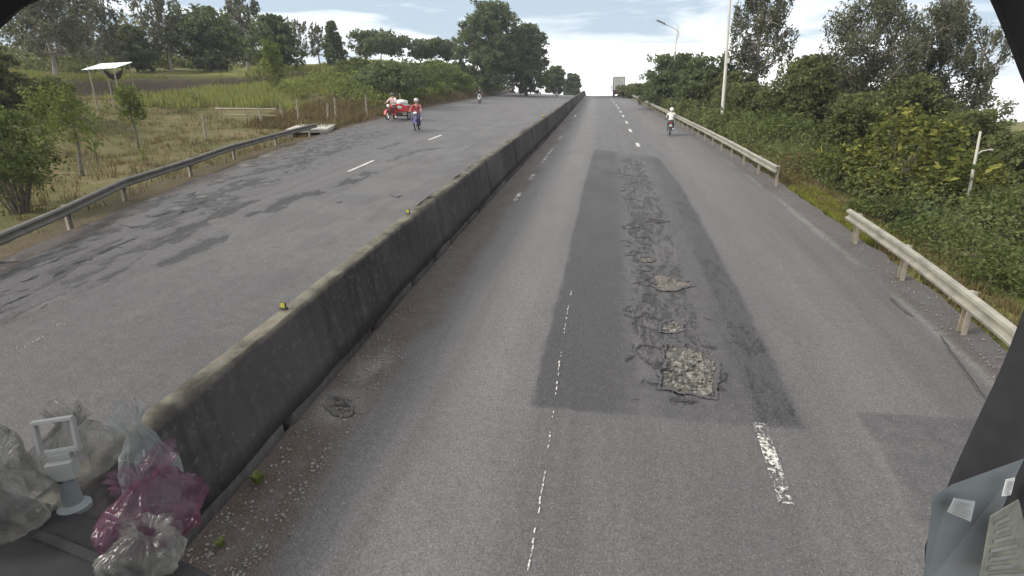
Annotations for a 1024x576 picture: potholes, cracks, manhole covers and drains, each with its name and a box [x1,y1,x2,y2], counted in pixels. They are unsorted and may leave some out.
pothole [658,318,686,334]
pothole [656,341,722,400]
pothole [650,272,696,292]
crack [623,222,727,404]
pothole [324,395,355,418]
